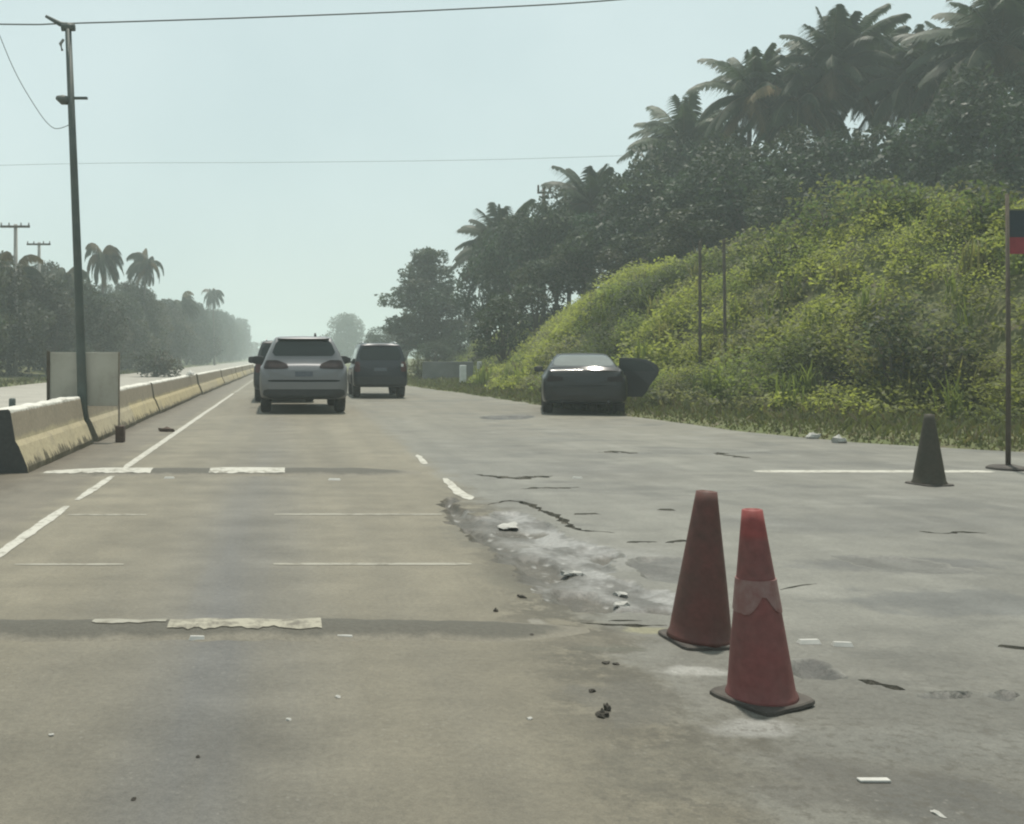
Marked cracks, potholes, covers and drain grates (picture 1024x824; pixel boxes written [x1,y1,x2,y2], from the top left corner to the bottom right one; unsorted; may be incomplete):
crack [475,474,686,543]
pothole [436,497,676,615]
crack [858,679,905,690]
